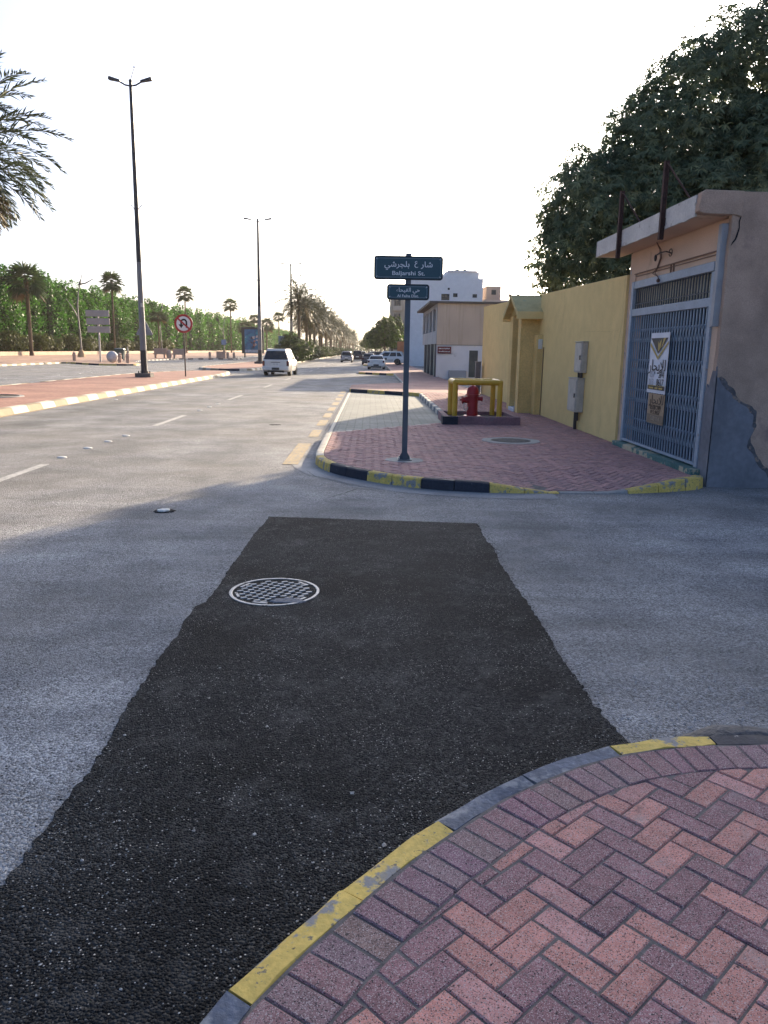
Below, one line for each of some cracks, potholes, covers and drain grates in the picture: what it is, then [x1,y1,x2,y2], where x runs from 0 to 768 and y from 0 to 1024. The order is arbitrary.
manhole cover [229,578,320,606]
